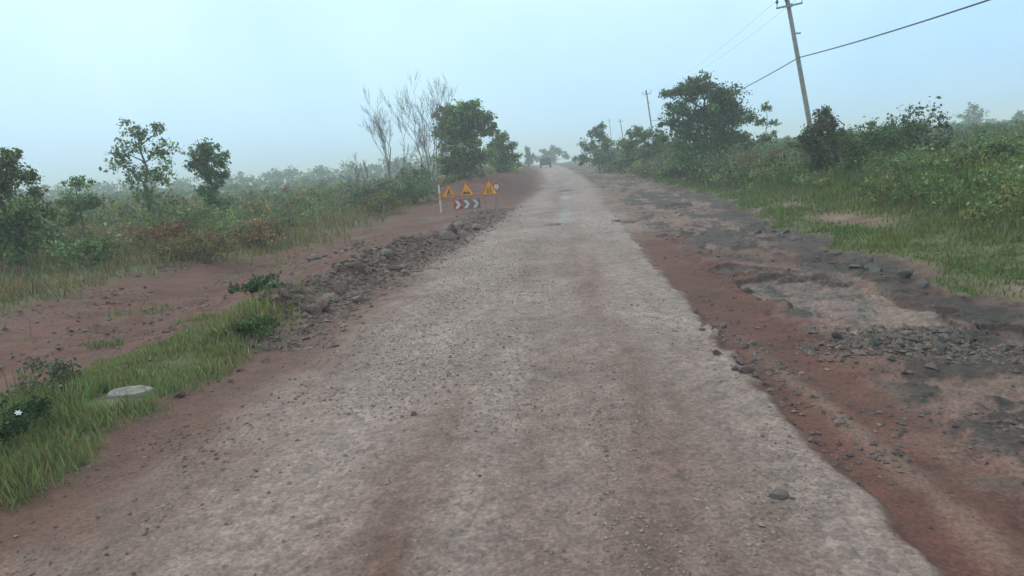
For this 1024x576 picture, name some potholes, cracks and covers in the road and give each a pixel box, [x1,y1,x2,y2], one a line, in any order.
pothole [728,271,1001,345]
pothole [703,264,791,277]
